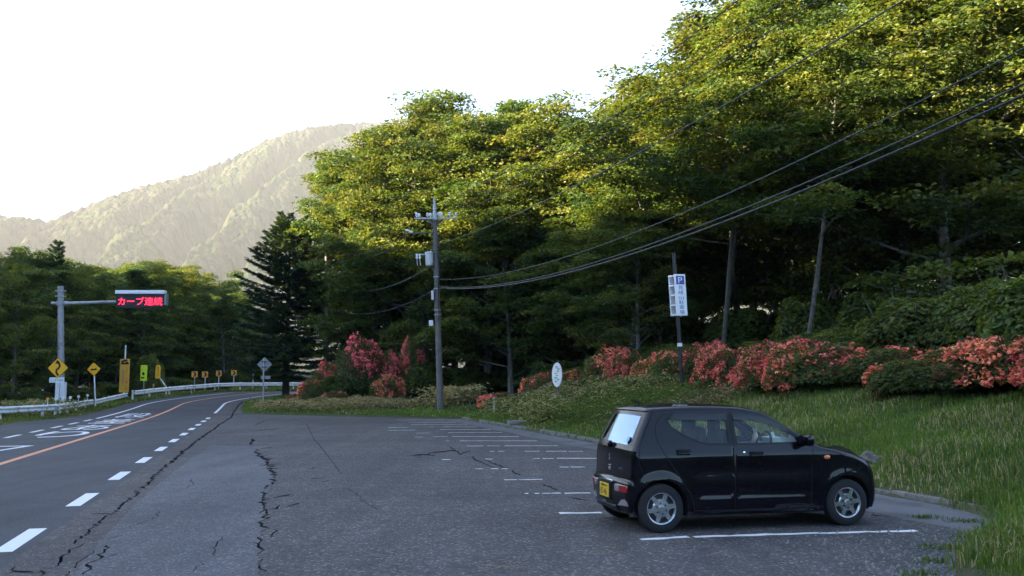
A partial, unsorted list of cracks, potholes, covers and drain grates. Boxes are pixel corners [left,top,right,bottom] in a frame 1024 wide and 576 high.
crack [306,424,378,510]
crack [7,401,301,576]
crack [411,446,522,476]
